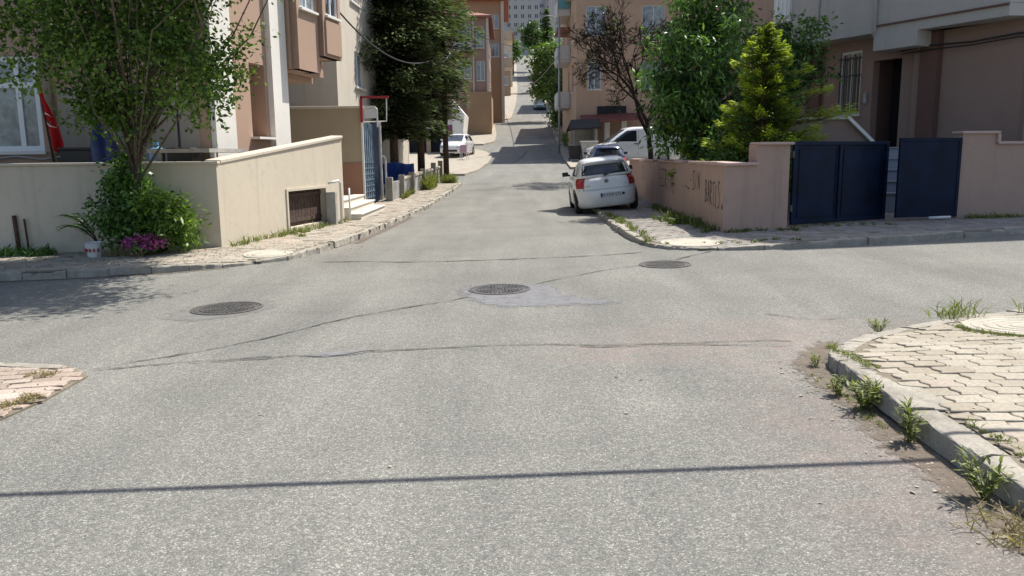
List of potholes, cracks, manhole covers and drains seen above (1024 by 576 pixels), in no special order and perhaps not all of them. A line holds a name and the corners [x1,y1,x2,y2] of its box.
manhole cover [961,316,1024,336]
manhole cover [190,301,263,315]
manhole cover [639,260,692,268]
manhole cover [469,284,531,295]
manhole cover [243,249,293,259]
